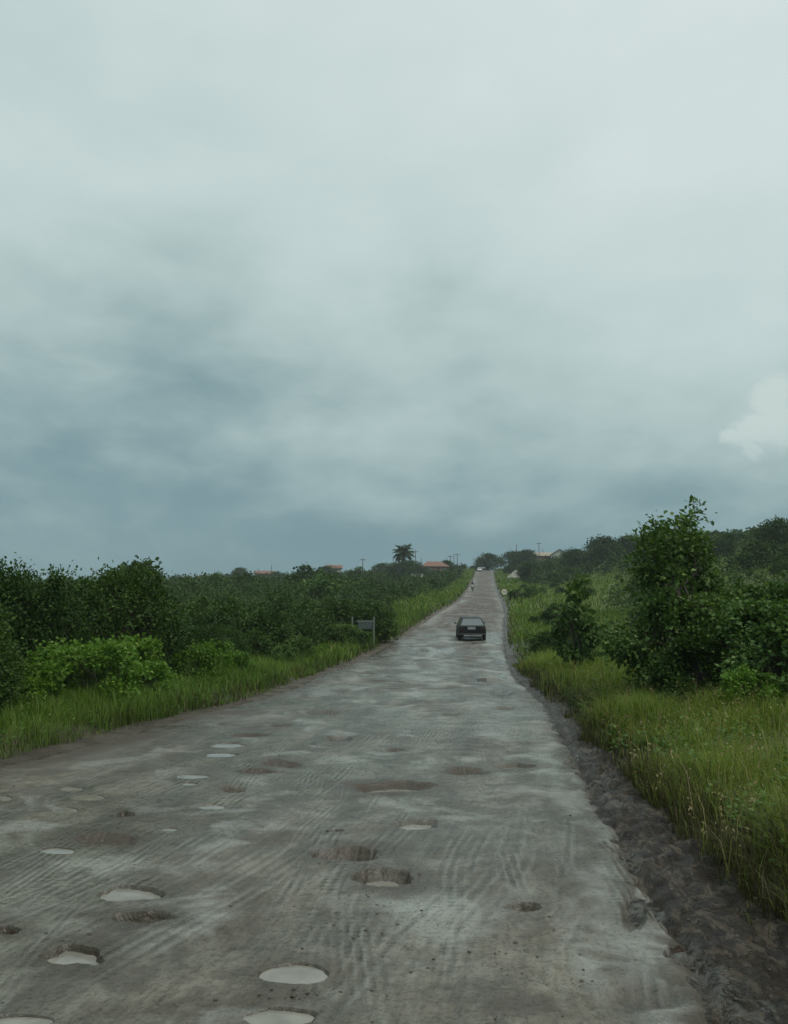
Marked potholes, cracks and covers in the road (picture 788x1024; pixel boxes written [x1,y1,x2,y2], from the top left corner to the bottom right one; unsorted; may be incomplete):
pothole [240,1007,319,1024]
pothole [352,780,439,793]
pothole [0,1014,55,1024]
pothole [38,943,105,965]
pothole [256,759,304,768]
pothole [351,867,414,886]
pothole [97,884,166,901]
pothole [307,845,381,862]
pothole [436,766,494,775]
pothole [502,902,542,912]
pothole [108,910,179,923]
pothole [67,832,145,846]
